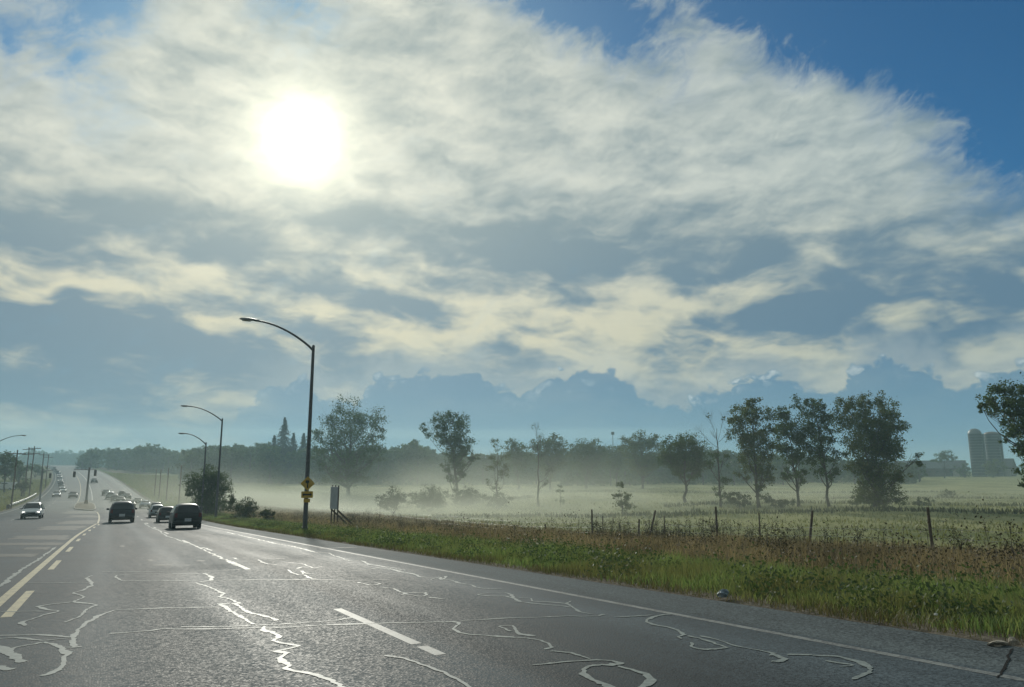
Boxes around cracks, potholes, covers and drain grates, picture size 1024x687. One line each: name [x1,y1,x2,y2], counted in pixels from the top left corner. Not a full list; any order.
crack [996,648,1013,678]
